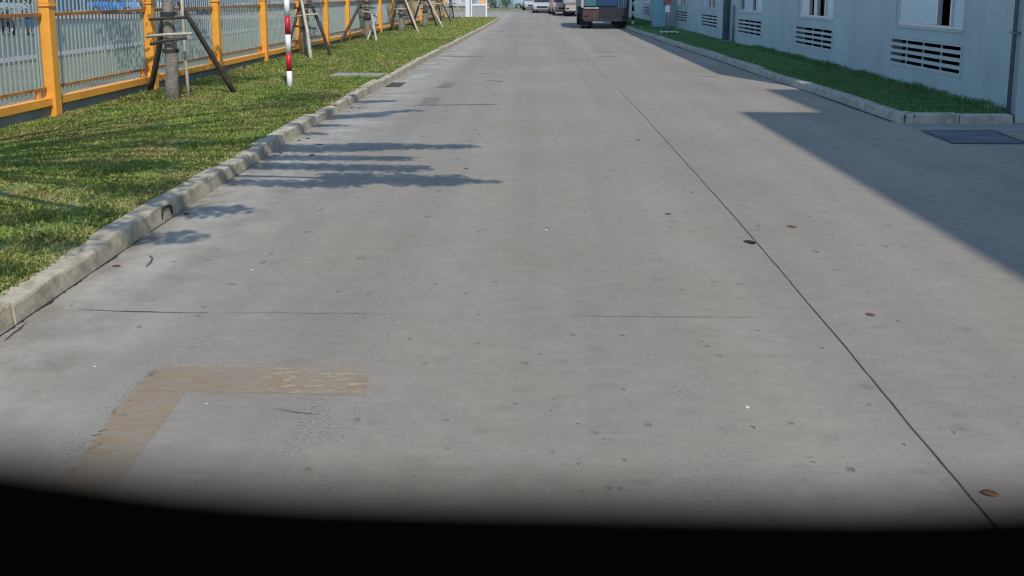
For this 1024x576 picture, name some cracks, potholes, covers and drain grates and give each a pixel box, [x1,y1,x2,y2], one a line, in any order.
manhole cover [921,130,1024,144]
